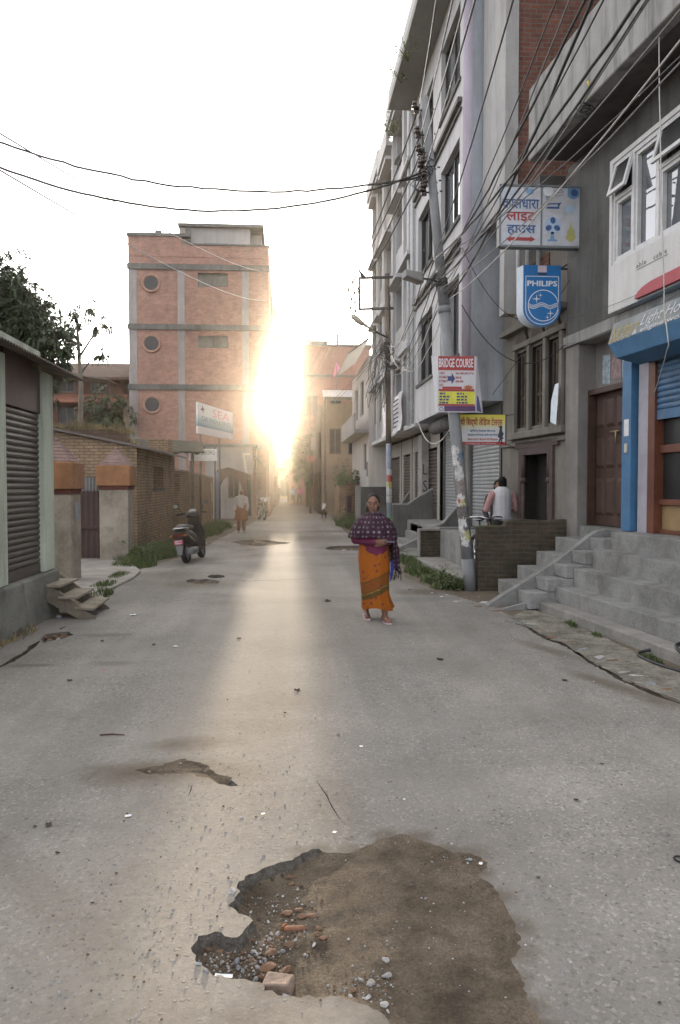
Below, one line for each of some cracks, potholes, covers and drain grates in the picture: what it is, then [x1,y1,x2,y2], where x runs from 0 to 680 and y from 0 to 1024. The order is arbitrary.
crack [0,641,40,667]
pothole [134,759,238,786]
crack [508,621,680,704]
pothole [191,834,545,1024]
